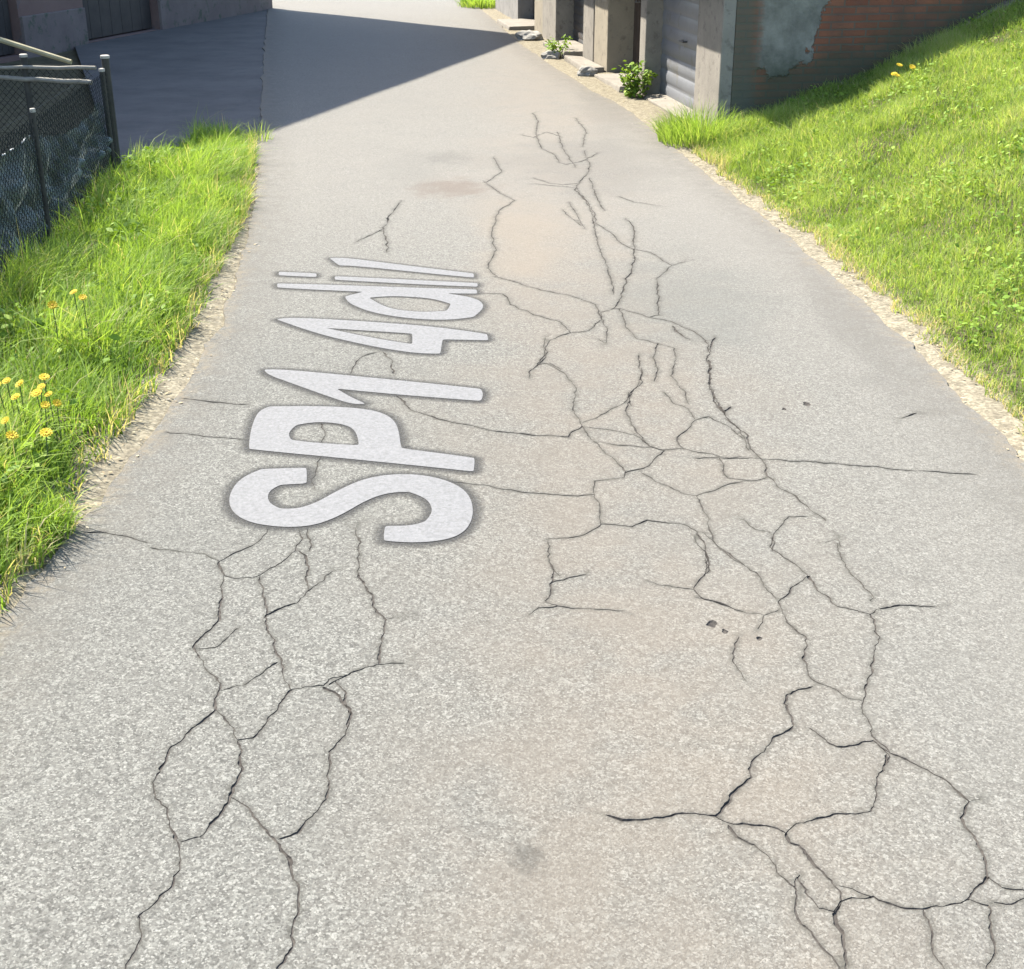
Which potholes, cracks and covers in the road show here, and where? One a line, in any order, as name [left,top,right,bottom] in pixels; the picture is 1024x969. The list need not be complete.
crack [125,528,405,969]
crack [358,201,402,252]
crack [456,113,1024,969]
